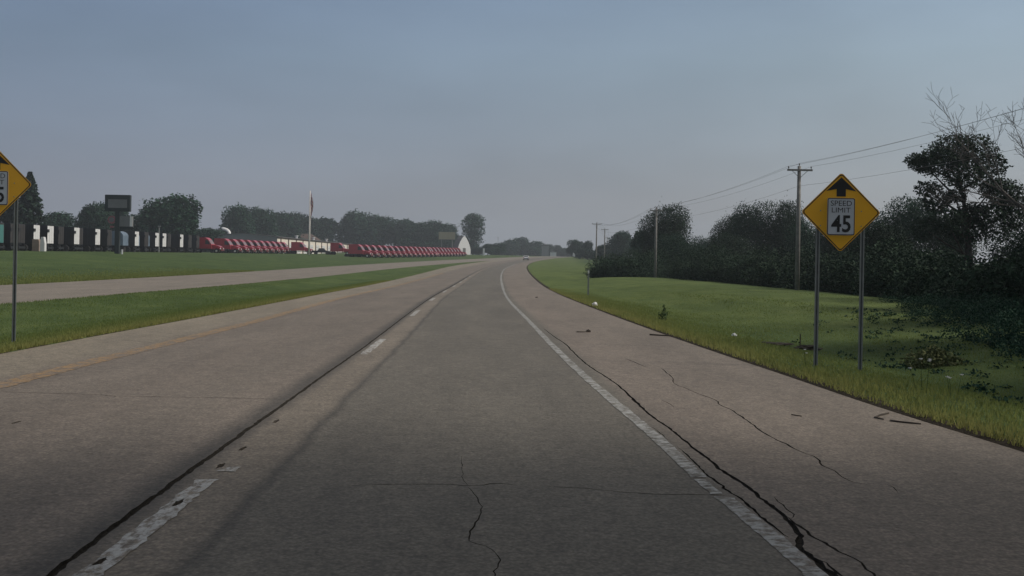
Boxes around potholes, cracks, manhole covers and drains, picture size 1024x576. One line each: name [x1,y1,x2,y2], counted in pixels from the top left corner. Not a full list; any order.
crack [355,330,897,576]
